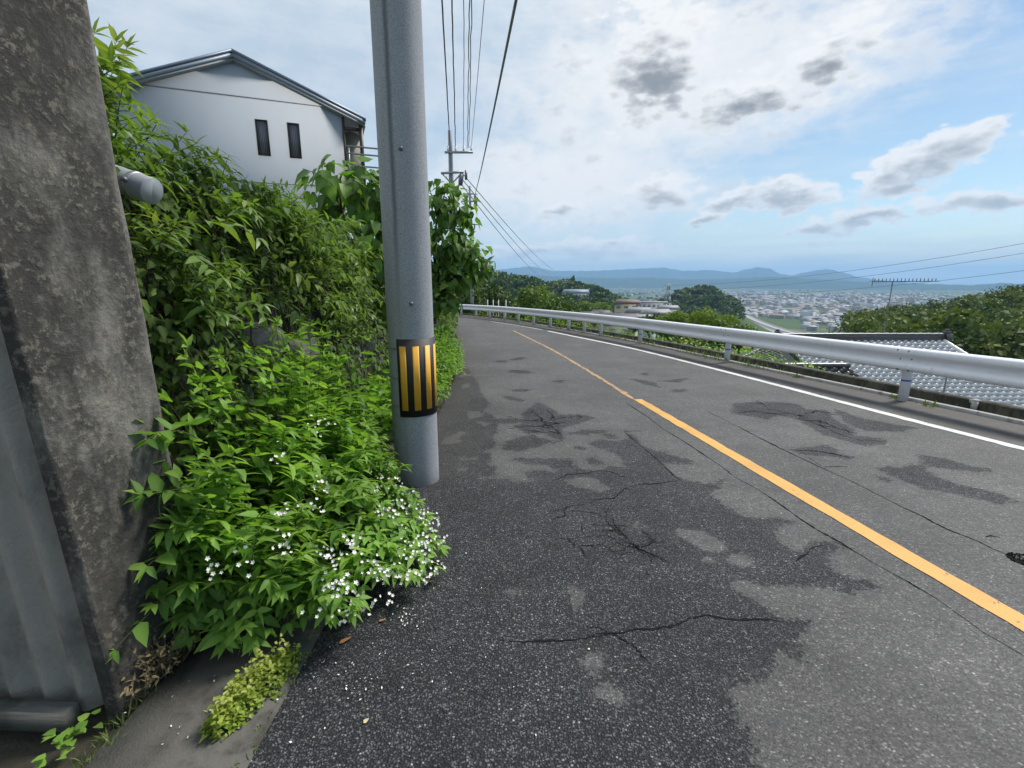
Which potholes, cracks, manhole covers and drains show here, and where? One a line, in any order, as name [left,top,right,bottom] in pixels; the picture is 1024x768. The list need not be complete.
pothole [1005,551,1024,565]
crack [484,614,781,661]
crack [553,470,672,574]
crack [748,400,874,441]
